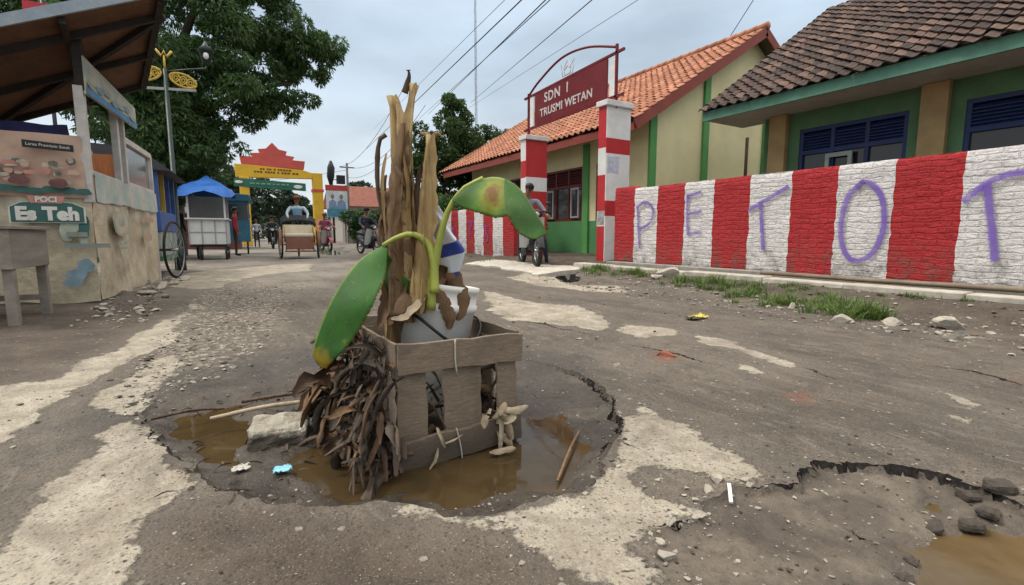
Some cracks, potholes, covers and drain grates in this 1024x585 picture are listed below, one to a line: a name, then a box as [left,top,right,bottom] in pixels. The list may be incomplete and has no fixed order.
crack [926,365,1021,385]
crack [632,345,726,368]
pothole [653,463,1024,585]
pothole [555,272,581,283]
pothole [141,353,624,517]
